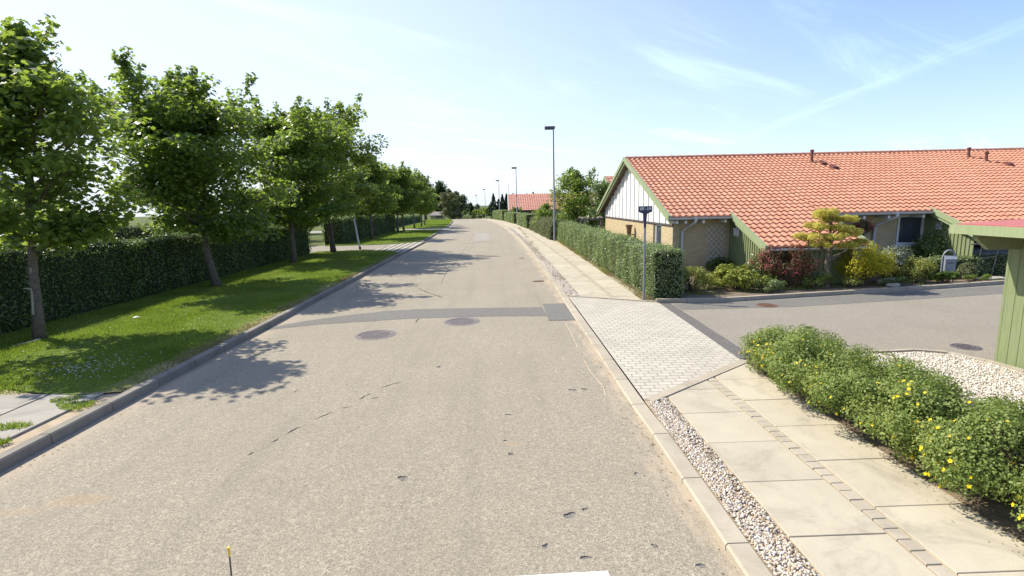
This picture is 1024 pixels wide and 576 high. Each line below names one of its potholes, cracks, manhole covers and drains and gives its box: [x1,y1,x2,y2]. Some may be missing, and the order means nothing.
crack [565,323,605,396]
manhole cover [354,330,396,340]
manhole cover [444,317,480,326]
crack [249,382,402,455]
